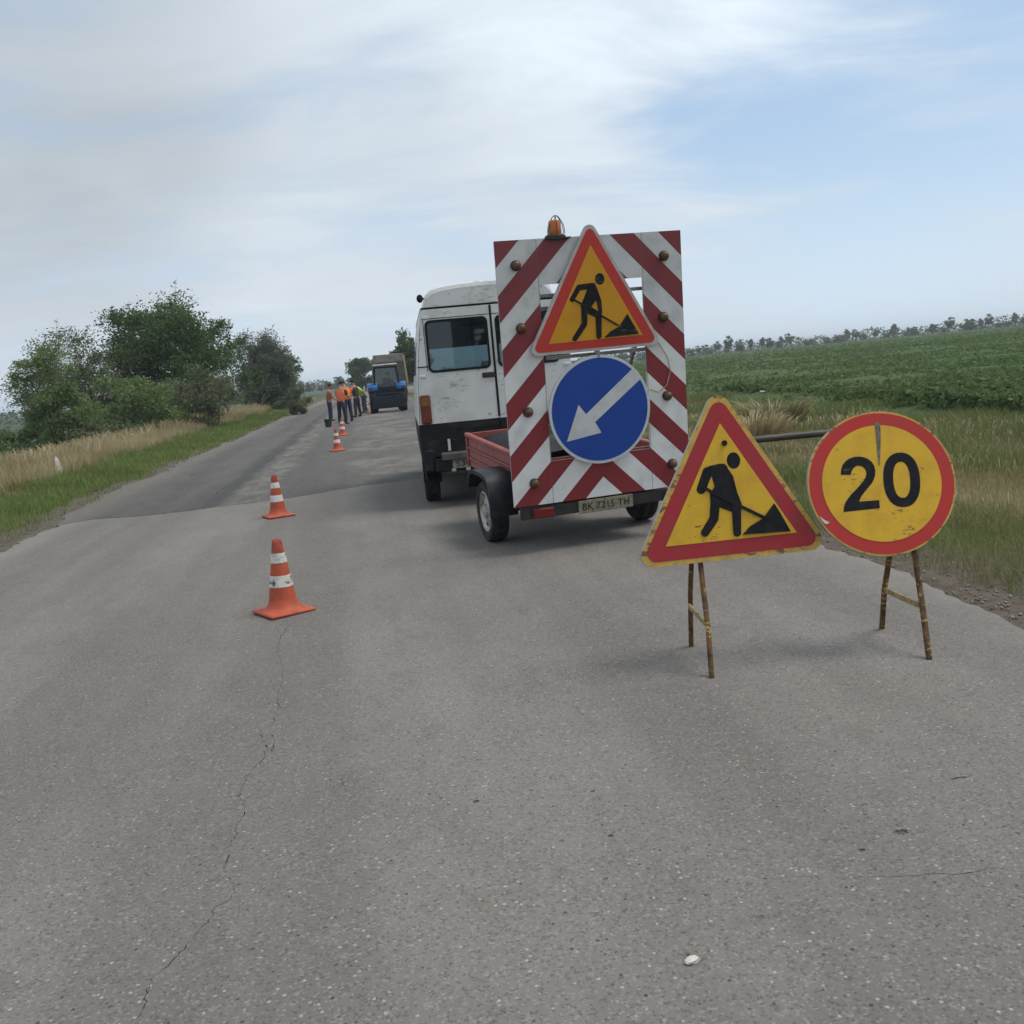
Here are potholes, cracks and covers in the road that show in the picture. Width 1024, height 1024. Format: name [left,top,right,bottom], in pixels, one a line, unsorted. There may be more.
crack [772,867,1024,879]
crack [135,629,286,1024]
